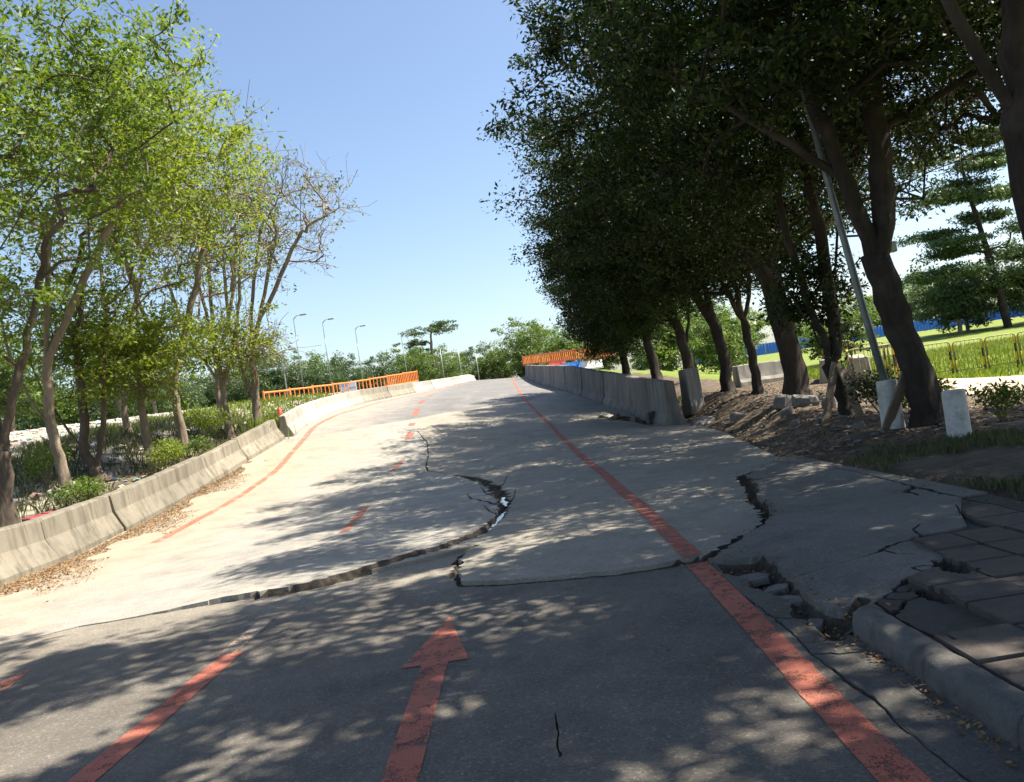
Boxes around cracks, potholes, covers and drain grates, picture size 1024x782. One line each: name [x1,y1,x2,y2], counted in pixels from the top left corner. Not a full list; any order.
crack [208,471,777,606]
pothole [718,556,871,641]
crack [745,462,1023,782]
